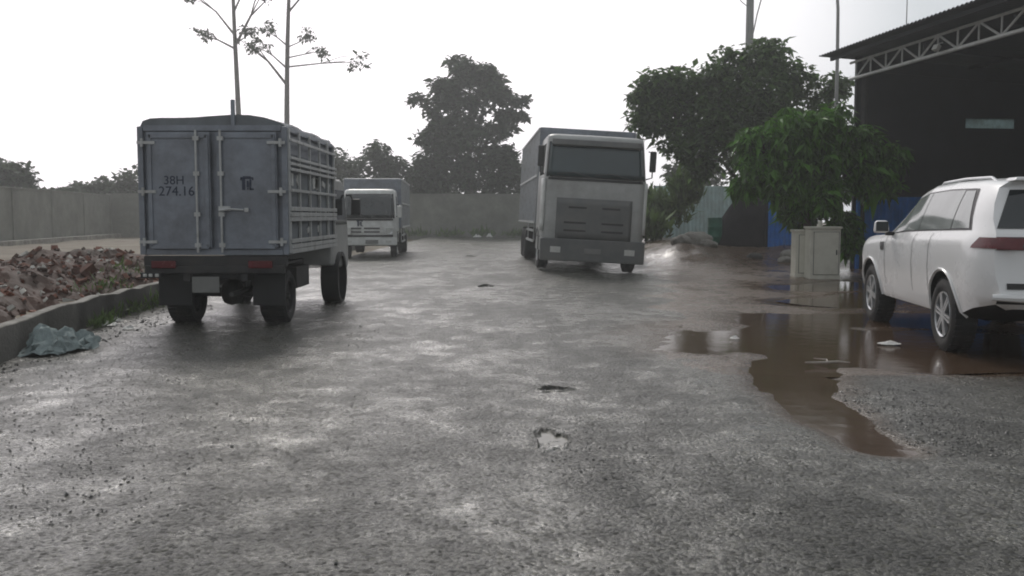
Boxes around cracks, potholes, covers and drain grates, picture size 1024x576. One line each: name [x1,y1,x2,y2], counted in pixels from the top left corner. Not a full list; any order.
pothole [531,426,573,454]
